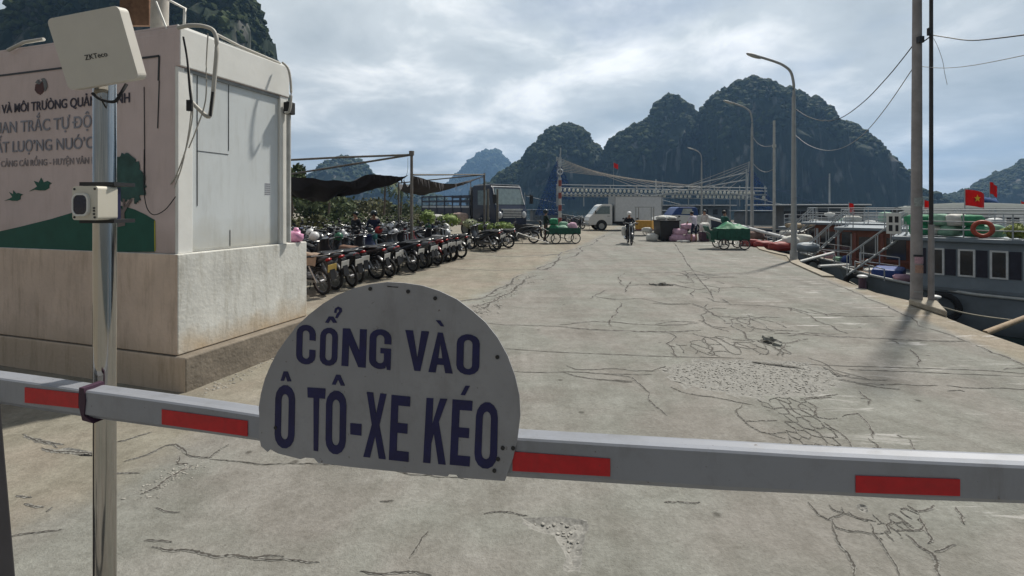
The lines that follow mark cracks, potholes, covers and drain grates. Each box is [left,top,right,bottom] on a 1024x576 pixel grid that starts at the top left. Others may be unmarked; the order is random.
pothole [522,516,589,572]
crack [12,495,62,537]
crack [23,434,92,455]
crack [144,500,432,575]
crack [808,502,965,576]
crack [117,432,468,513]
crack [516,242,1024,450]
